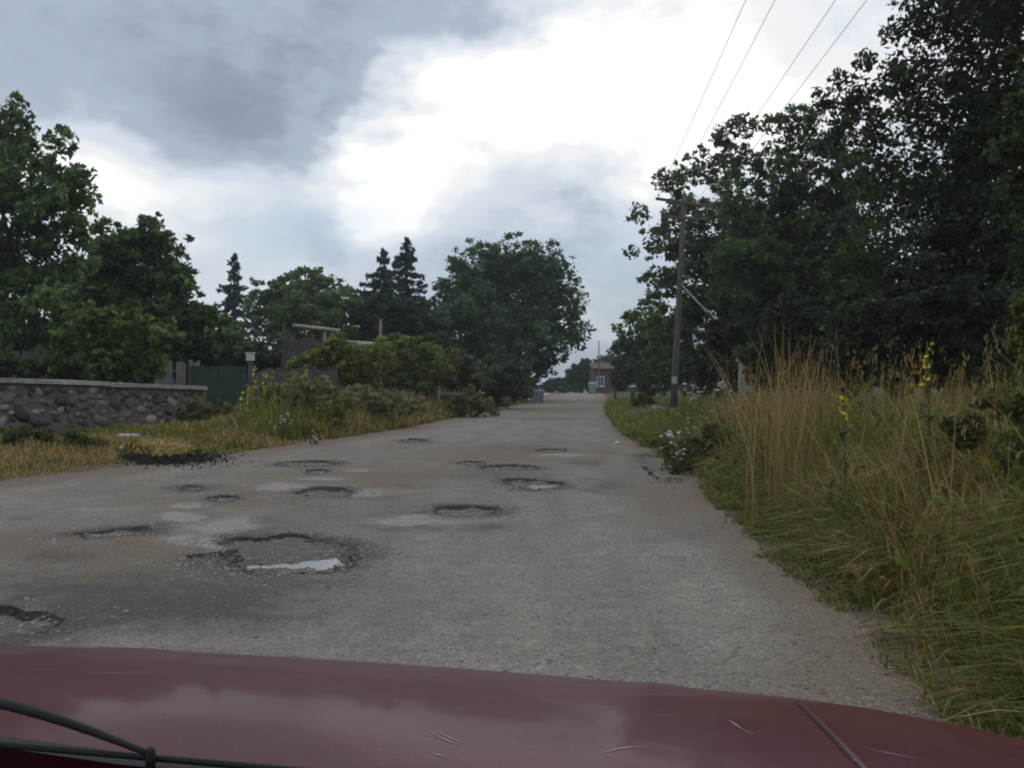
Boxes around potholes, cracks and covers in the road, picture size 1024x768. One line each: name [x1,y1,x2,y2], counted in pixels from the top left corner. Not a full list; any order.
pothole [173,528,403,588]
pothole [408,502,529,521]
pothole [265,485,379,500]
pothole [254,459,350,468]
pothole [461,463,554,472]
pothole [485,476,588,493]
